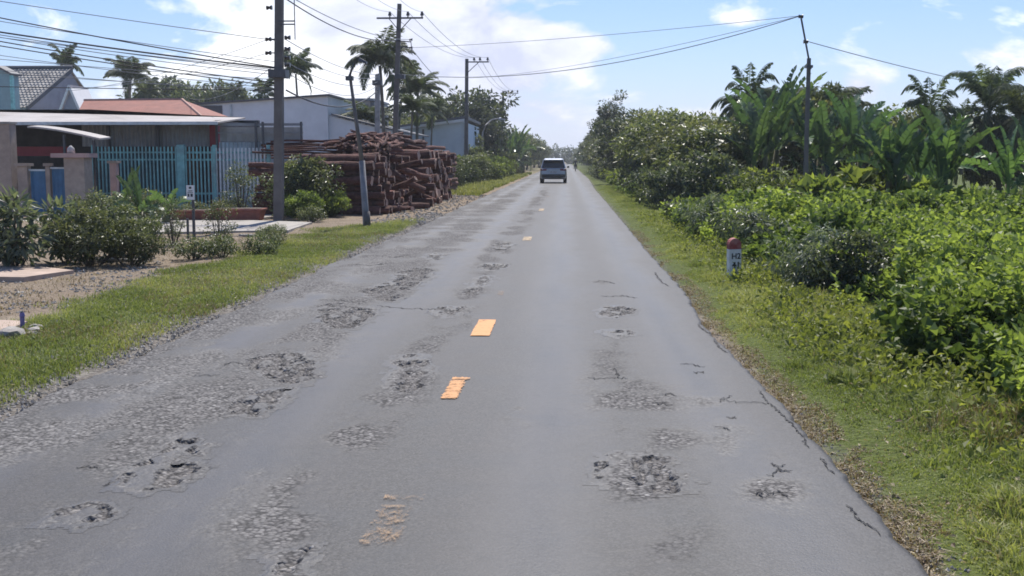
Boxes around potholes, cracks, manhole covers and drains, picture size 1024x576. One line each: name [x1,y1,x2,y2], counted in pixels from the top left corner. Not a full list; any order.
pothole [582,449,711,497]
pothole [379,353,441,395]
crack [715,391,880,534]
pothole [232,351,328,389]
pothole [591,305,641,319]
pothole [99,453,220,498]
pothole [309,301,390,331]
pothole [148,432,225,465]
pothole [23,500,134,533]
